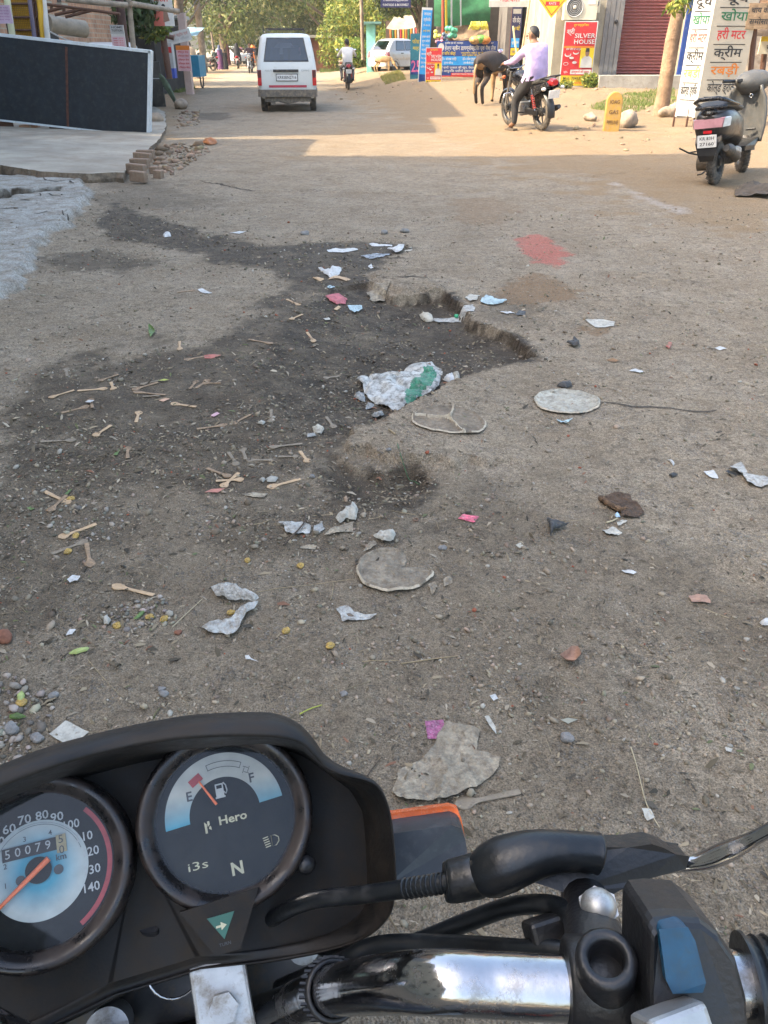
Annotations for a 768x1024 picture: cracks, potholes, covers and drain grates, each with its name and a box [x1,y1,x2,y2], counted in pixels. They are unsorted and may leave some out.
pothole [255,281,539,437]
pothole [317,454,438,506]
